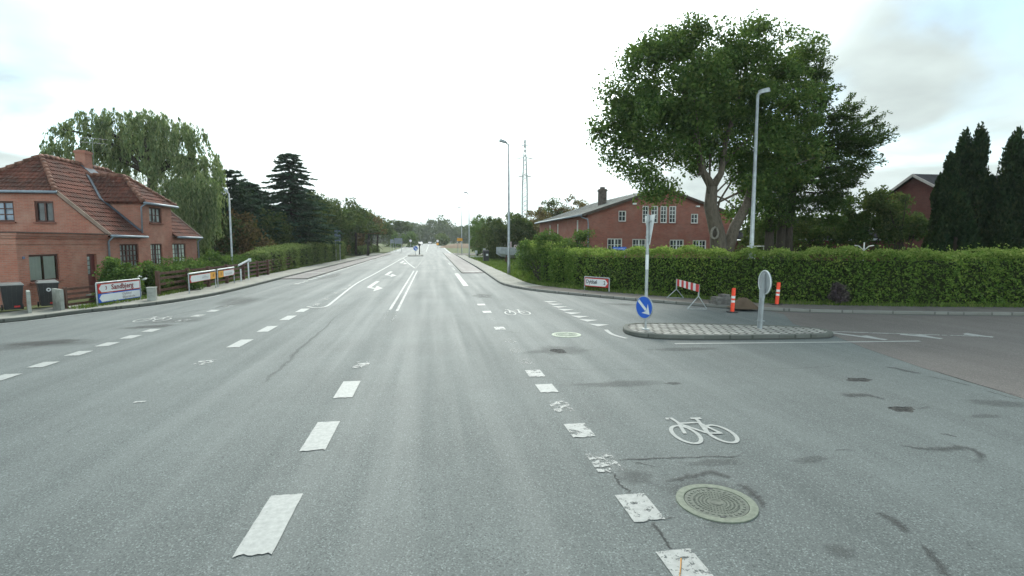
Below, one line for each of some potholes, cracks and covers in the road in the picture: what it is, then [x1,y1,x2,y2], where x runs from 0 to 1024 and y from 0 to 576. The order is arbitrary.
manhole cover [676,484,759,524]
crack [614,456,735,492]
